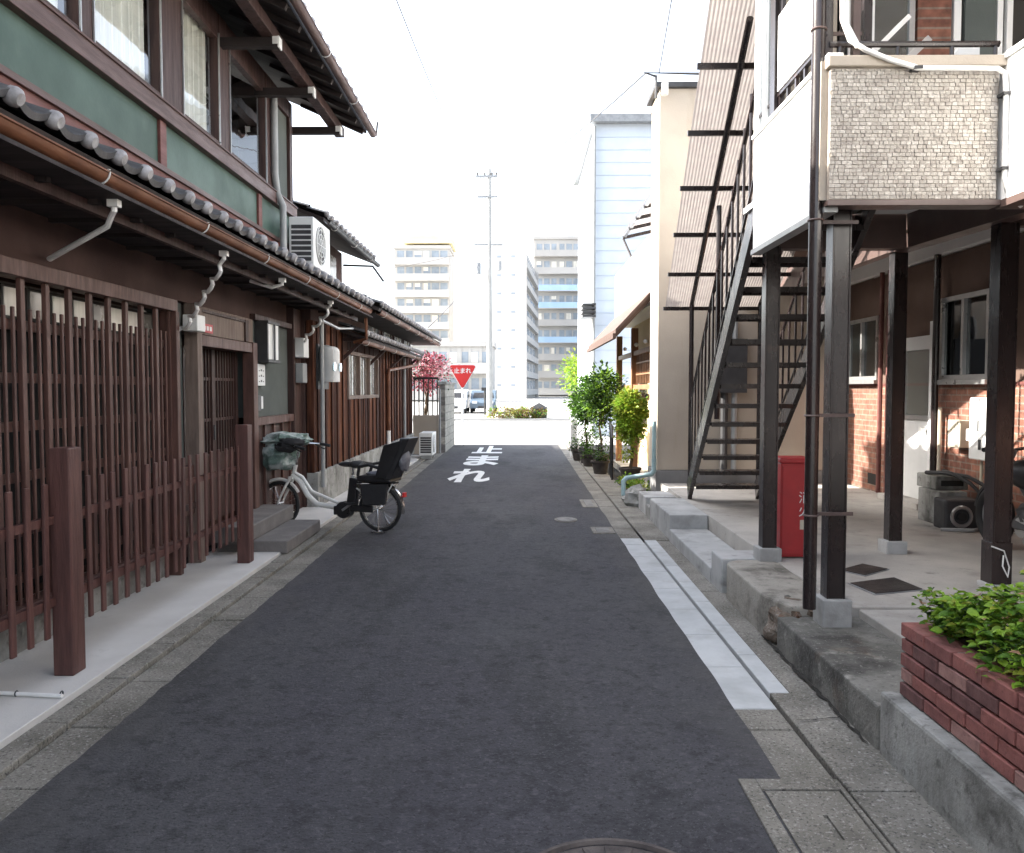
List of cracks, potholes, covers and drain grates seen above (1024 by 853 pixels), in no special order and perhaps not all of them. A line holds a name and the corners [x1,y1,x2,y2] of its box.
manhole cover [540,838,676,853]
